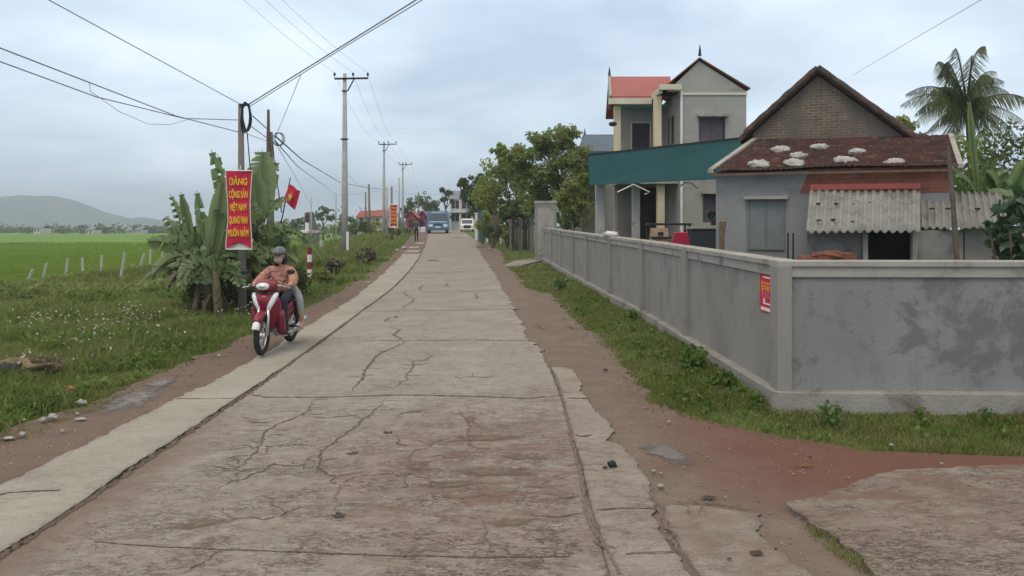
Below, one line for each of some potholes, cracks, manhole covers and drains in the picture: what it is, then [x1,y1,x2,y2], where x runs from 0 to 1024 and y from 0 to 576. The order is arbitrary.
crack [375,411,539,555]
crack [215,284,438,509]
crack [221,501,314,520]
